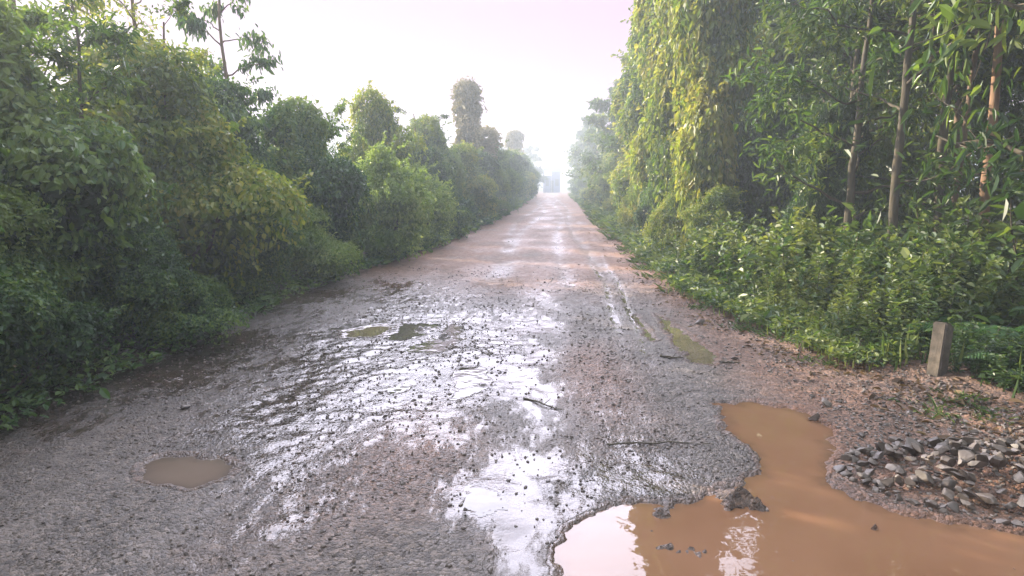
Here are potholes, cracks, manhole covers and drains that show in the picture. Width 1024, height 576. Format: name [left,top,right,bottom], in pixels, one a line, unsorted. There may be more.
pothole [384,322,440,340]
pothole [129,450,245,492]
pothole [403,323,467,353]
pothole [650,312,725,366]
pothole [337,323,400,338]
pothole [546,398,1024,576]
